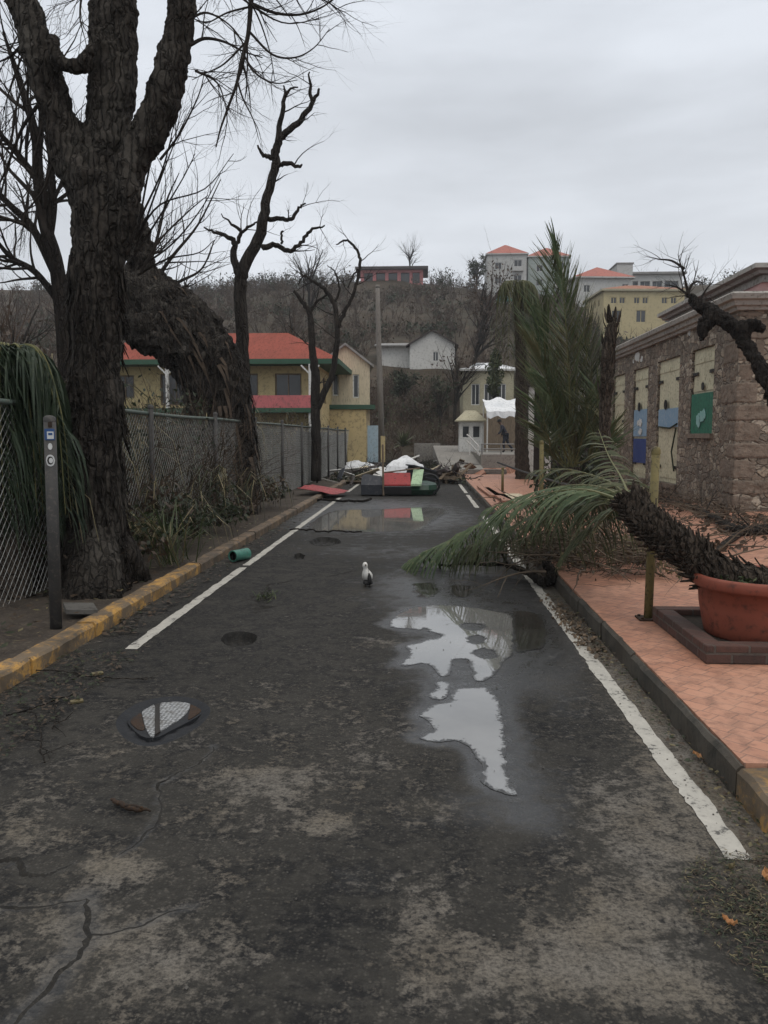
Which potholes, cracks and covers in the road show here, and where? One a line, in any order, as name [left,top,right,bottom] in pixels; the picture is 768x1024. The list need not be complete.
crack [119,747,215,855]
manhole cover [116,696,210,746]
crack [0,857,73,878]
pothole [221,631,257,647]
crack [0,898,193,1024]
pothole [309,537,341,546]
